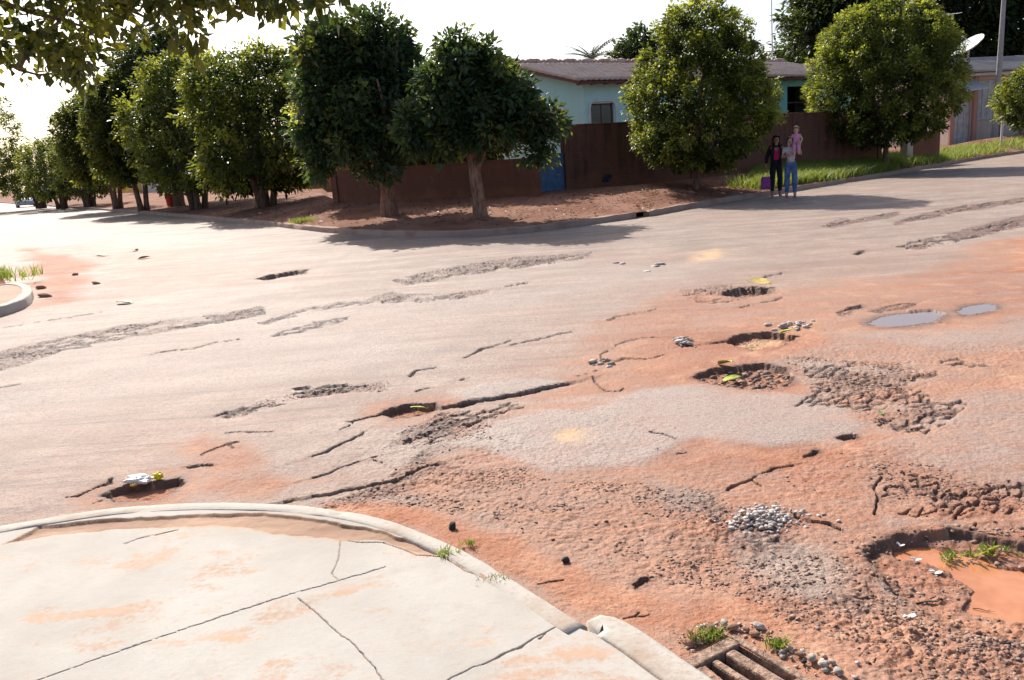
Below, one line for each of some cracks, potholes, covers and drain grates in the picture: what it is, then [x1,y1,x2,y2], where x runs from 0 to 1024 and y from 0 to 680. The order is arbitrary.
pothole [728,331,798,351]
crack [0,251,595,388]
pothole [381,402,439,419]
pothole [98,476,186,503]
crack [726,464,794,491]
crack [186,384,439,504]
pothole [691,363,796,390]
drain grate [684,635,811,680]
crack [126,529,179,544]
pothole [722,286,772,298]
crack [872,472,1024,537]
crack [331,540,486,582]
